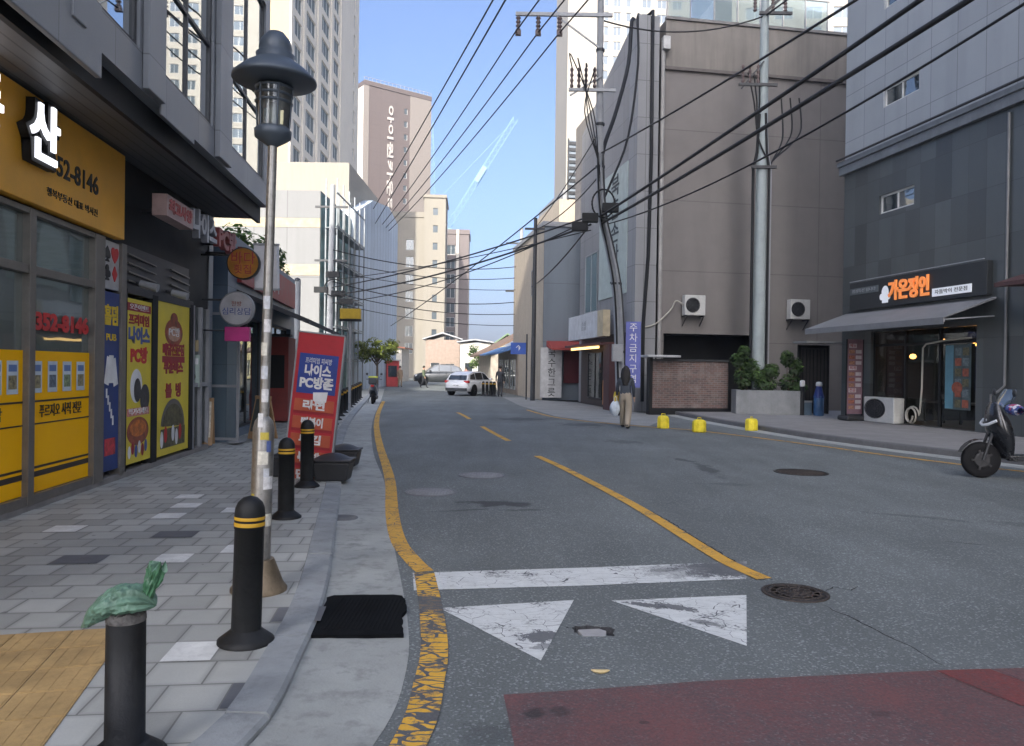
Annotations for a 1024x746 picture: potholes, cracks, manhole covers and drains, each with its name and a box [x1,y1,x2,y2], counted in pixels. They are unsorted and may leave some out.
crack [826,587,944,666]
manhole cover [761,583,830,603]
manhole cover [405,487,457,496]
